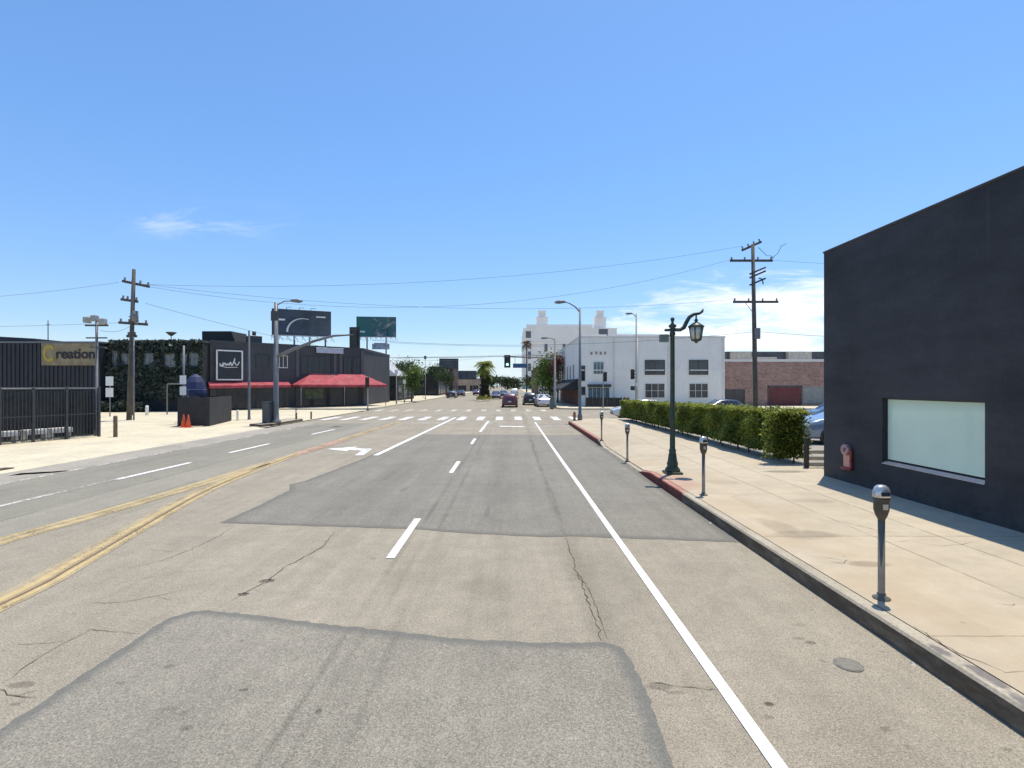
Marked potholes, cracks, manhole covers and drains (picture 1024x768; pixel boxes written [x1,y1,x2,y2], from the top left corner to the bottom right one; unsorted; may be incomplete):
crack [221,534,333,606]
crack [2,629,140,697]
crack [532,443,607,639]
crack [101,528,231,603]
manhole cover [833,657,864,672]
